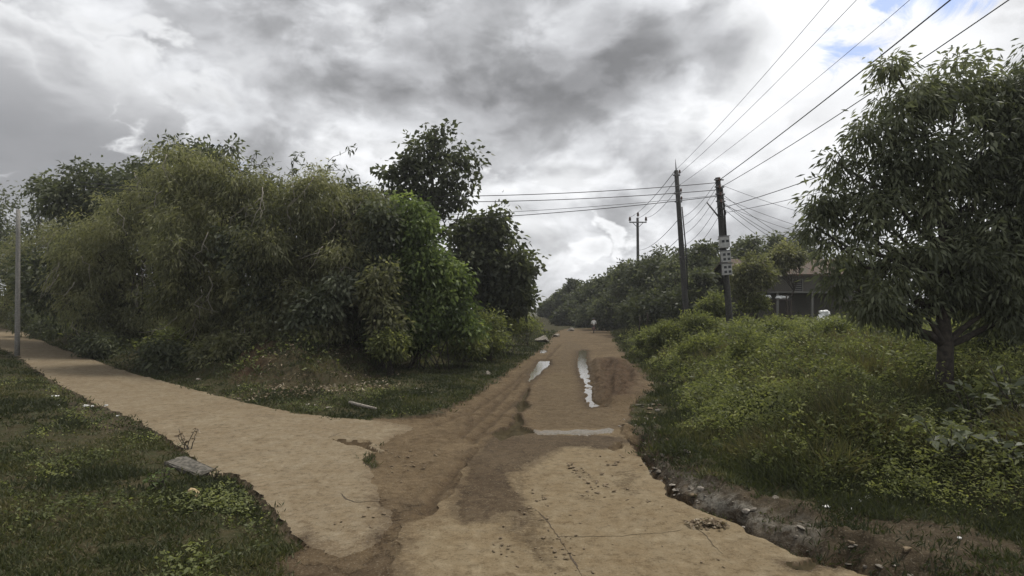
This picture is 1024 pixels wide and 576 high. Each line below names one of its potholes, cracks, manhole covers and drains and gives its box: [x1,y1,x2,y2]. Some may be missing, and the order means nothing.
pothole [576,349,606,408]
pothole [527,359,552,382]
crack [539,512,679,572]
